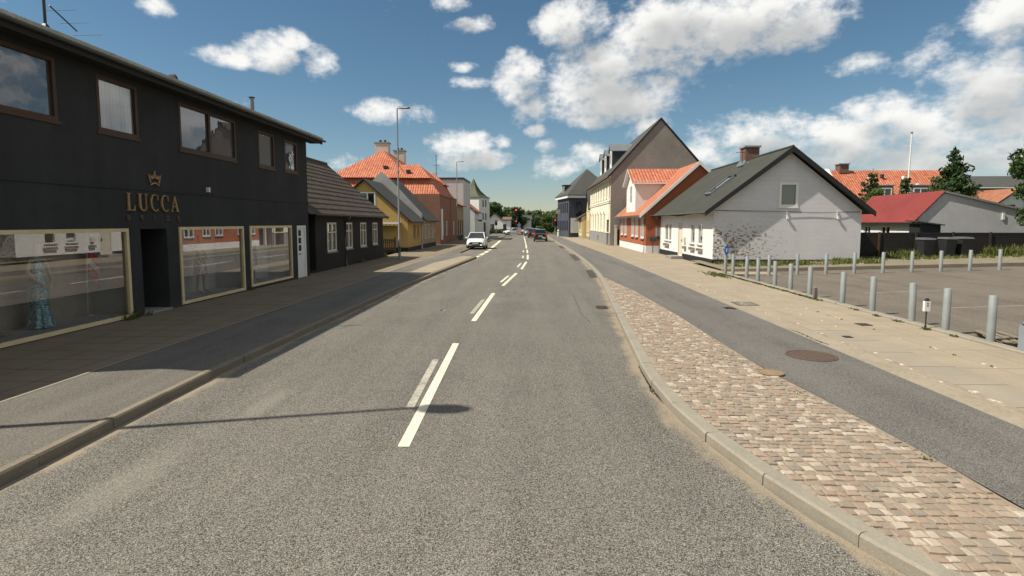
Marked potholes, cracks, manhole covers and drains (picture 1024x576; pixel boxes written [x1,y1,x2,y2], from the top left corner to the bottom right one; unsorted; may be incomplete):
manhole cover [785,350,839,362]
